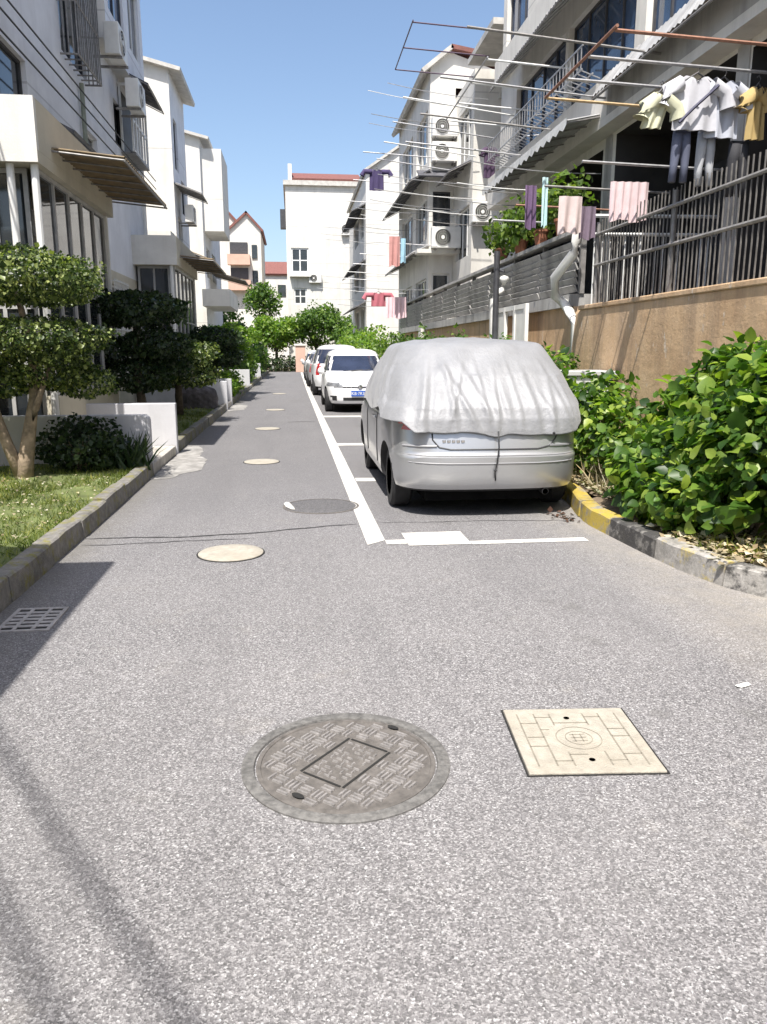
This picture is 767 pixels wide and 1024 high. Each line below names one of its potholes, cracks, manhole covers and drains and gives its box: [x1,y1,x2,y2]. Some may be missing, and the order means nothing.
manhole cover [241,713,450,825]
drain grate [0,607,69,633]
manhole cover [501,708,671,776]
manhole cover [196,544,265,563]
manhole cover [283,499,359,514]
